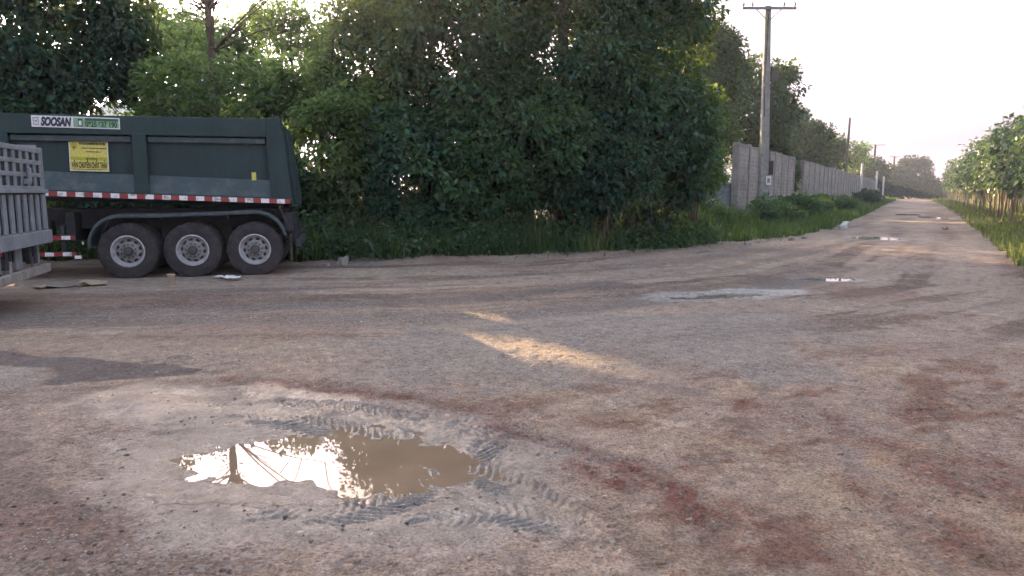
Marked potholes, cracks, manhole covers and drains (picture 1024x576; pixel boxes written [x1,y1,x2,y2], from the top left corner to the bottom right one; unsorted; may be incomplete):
pothole [655,290,793,301]
pothole [87,410,529,515]
